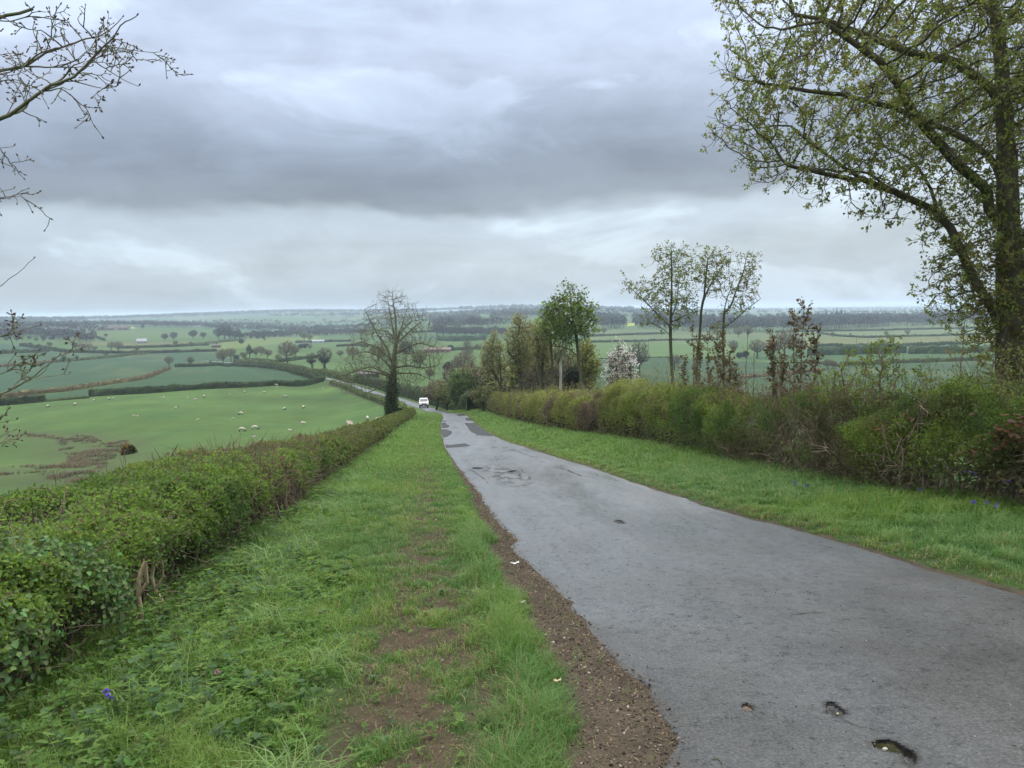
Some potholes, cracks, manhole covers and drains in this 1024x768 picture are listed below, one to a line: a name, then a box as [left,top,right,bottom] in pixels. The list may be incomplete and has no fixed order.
pothole [872,739,919,767]
pothole [825,702,846,717]
